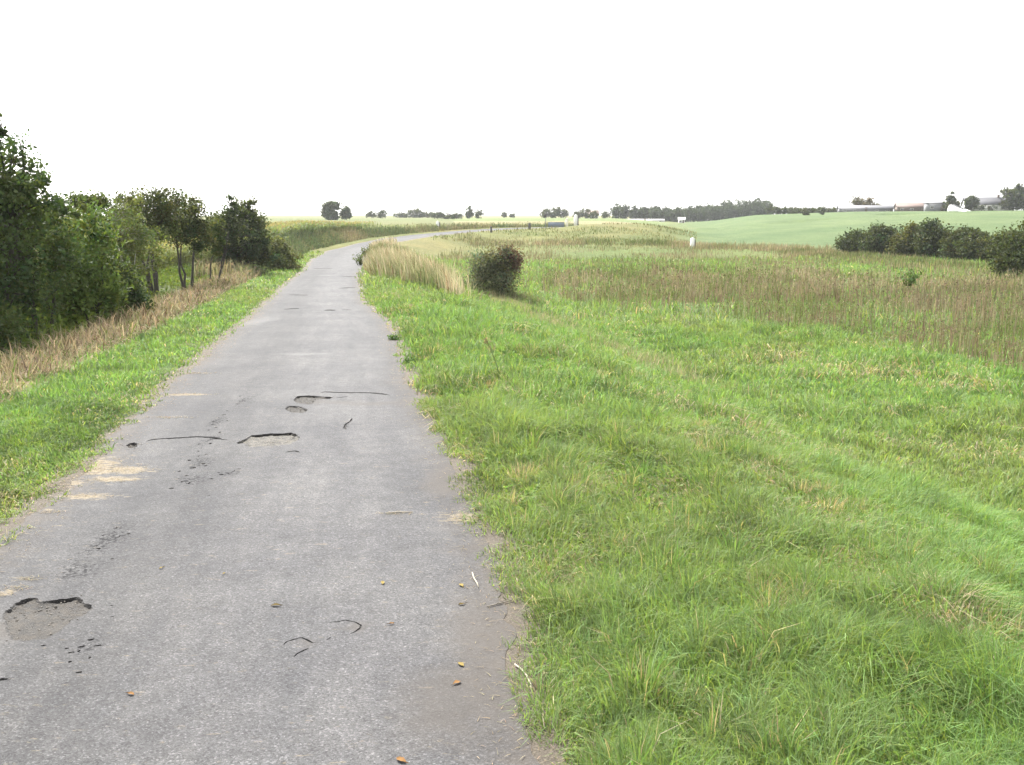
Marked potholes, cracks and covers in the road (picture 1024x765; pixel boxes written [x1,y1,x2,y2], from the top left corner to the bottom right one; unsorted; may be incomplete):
pothole [285,405,308,413]
pothole [294,395,333,404]
pothole [2,595,95,641]
crack [283,620,362,657]
crack [96,414,235,560]
pothole [234,433,300,447]
